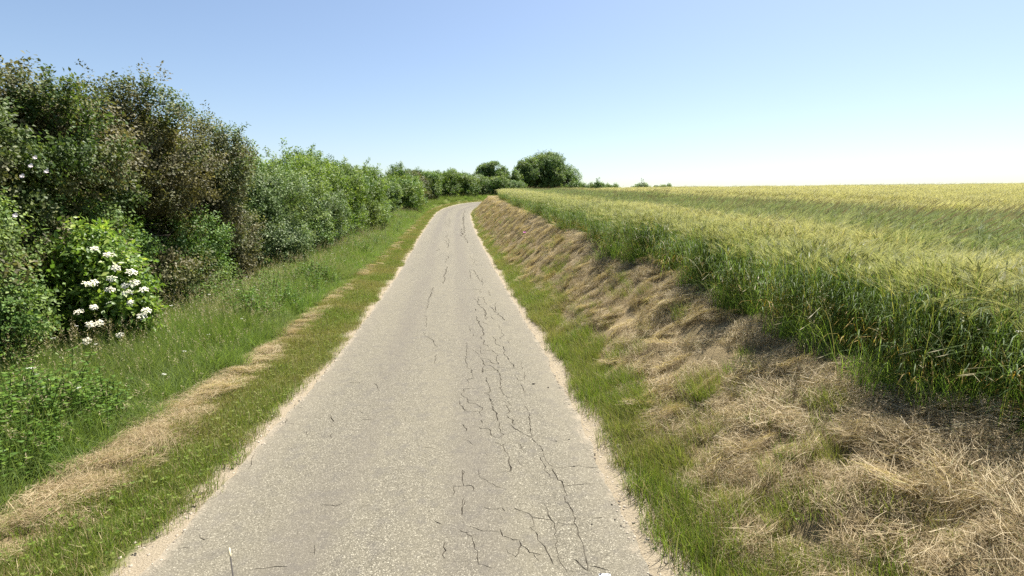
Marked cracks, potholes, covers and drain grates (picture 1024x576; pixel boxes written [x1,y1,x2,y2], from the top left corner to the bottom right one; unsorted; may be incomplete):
crack [423,211,468,363]
crack [435,256,610,572]
